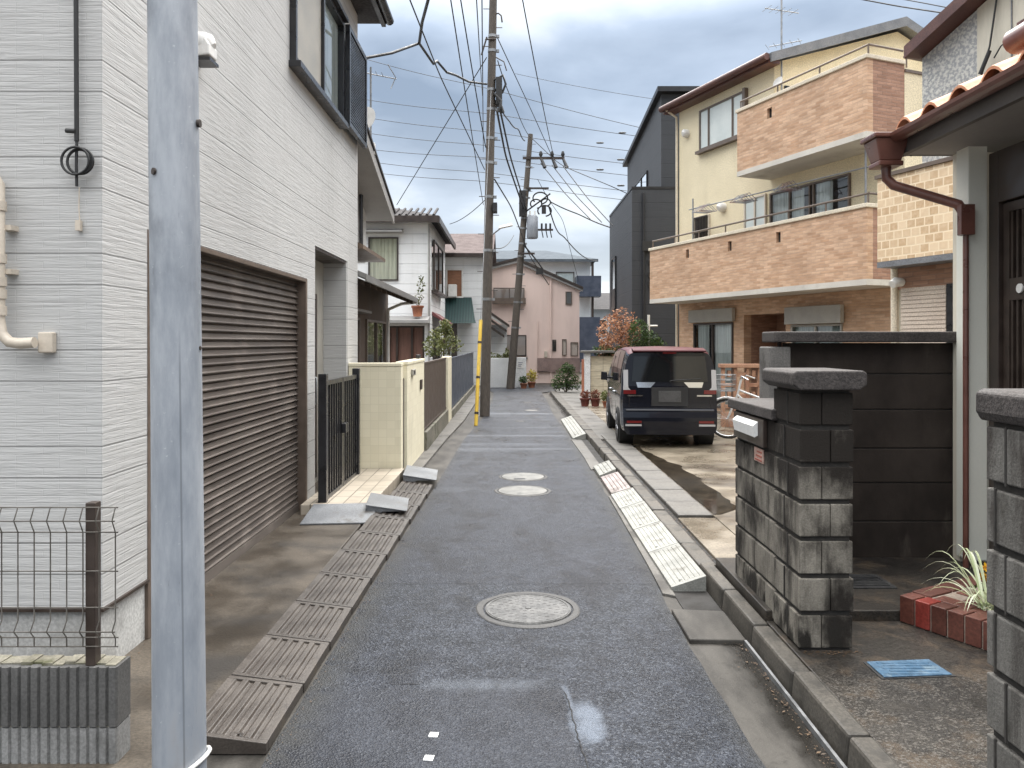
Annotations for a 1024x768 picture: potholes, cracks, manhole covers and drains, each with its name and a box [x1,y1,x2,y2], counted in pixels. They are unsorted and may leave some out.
manhole cover [499,472,547,481]
manhole cover [476,592,580,629]
crack [564,692,588,768]
manhole cover [494,485,552,497]
